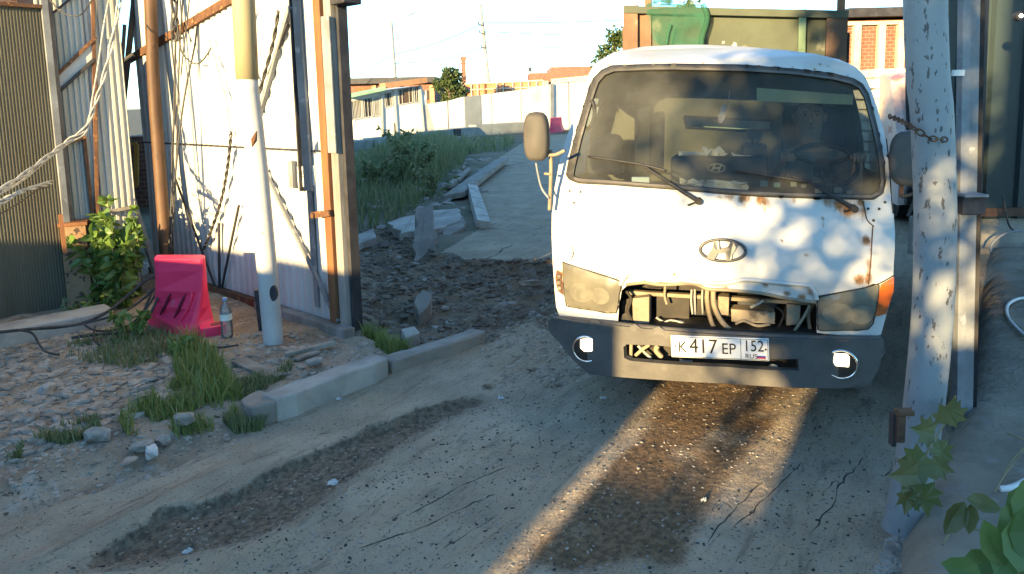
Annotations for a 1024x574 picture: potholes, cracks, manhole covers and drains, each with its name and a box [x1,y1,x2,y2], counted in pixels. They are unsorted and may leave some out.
crack [707,458,863,543]
pothole [60,394,497,574]
crack [357,466,507,549]
